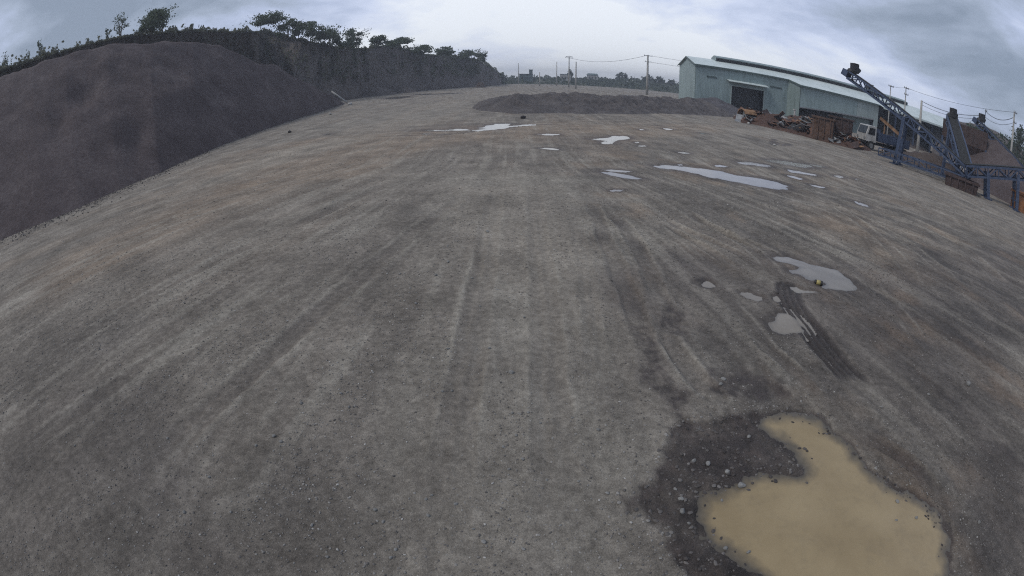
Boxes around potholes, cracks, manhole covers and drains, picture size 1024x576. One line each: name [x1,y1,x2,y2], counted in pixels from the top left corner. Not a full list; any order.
pothole [614,405,960,576]
